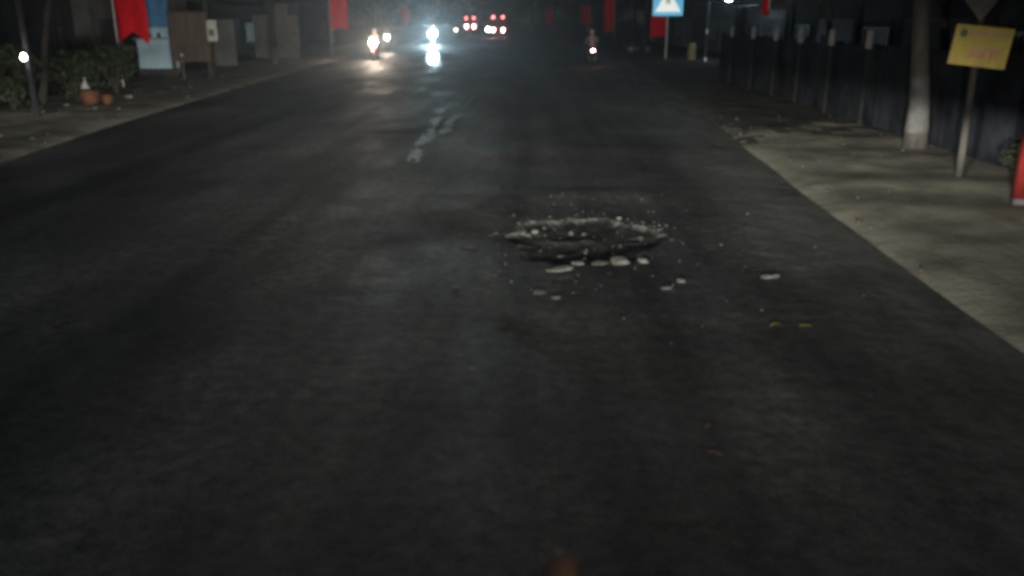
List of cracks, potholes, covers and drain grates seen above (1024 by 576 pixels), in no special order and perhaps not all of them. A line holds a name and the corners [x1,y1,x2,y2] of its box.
pothole [503,217,670,267]
